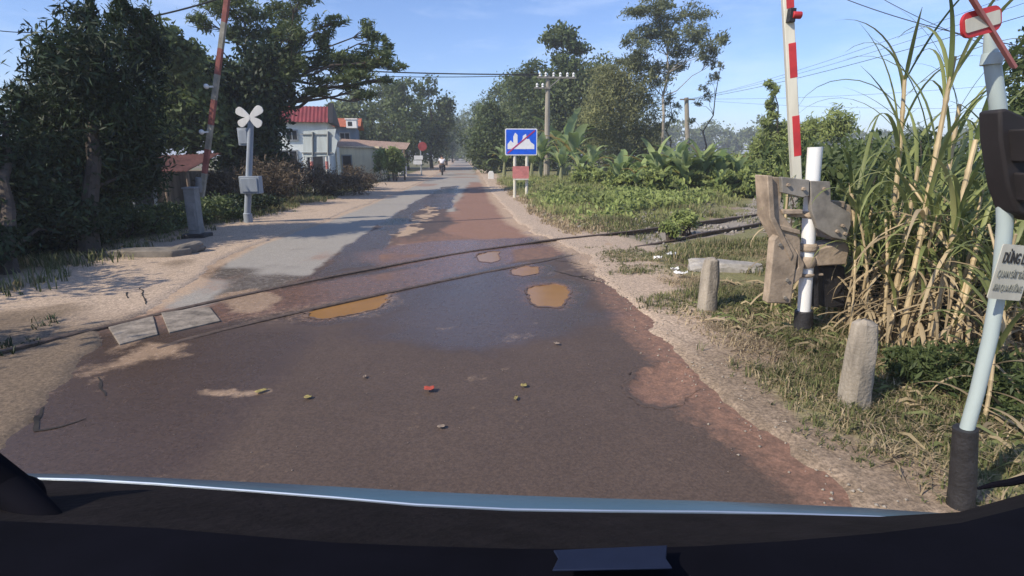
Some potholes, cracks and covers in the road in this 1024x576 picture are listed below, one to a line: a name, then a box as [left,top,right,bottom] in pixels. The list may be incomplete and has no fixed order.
pothole [525,282,573,308]
pothole [476,250,501,263]
pothole [303,293,392,319]
crack [33,407,86,432]
pothole [509,265,540,276]
